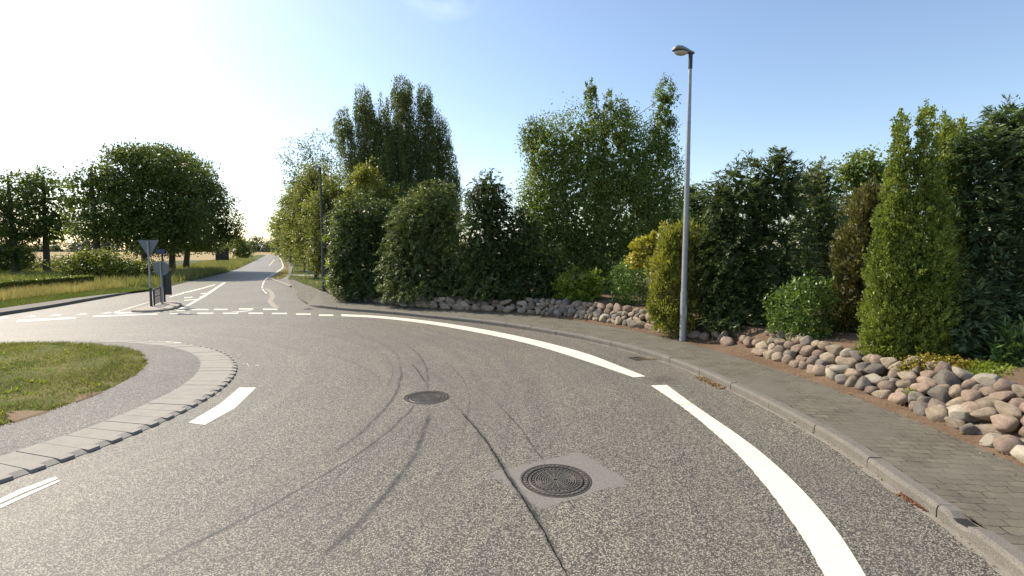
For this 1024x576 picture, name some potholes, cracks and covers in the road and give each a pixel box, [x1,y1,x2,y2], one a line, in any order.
crack [461,409,575,576]
manhole cover [403,391,450,405]
manhole cover [520,464,592,498]
